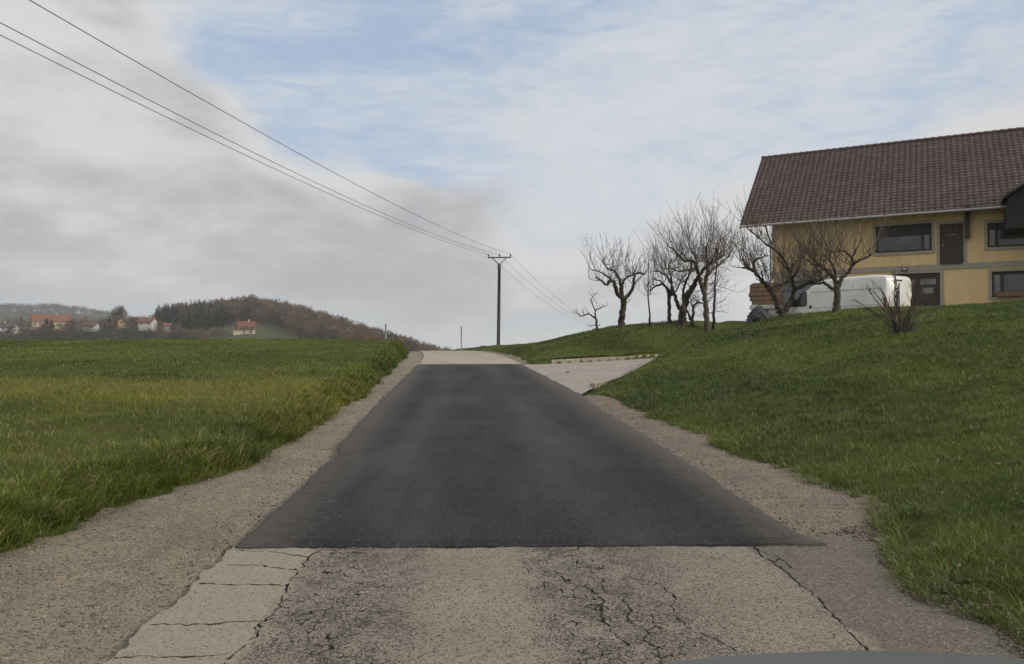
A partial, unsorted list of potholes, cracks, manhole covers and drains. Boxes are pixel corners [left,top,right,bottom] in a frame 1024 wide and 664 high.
crack [113,548,384,664]
crack [753,547,869,651]
crack [524,547,737,664]
